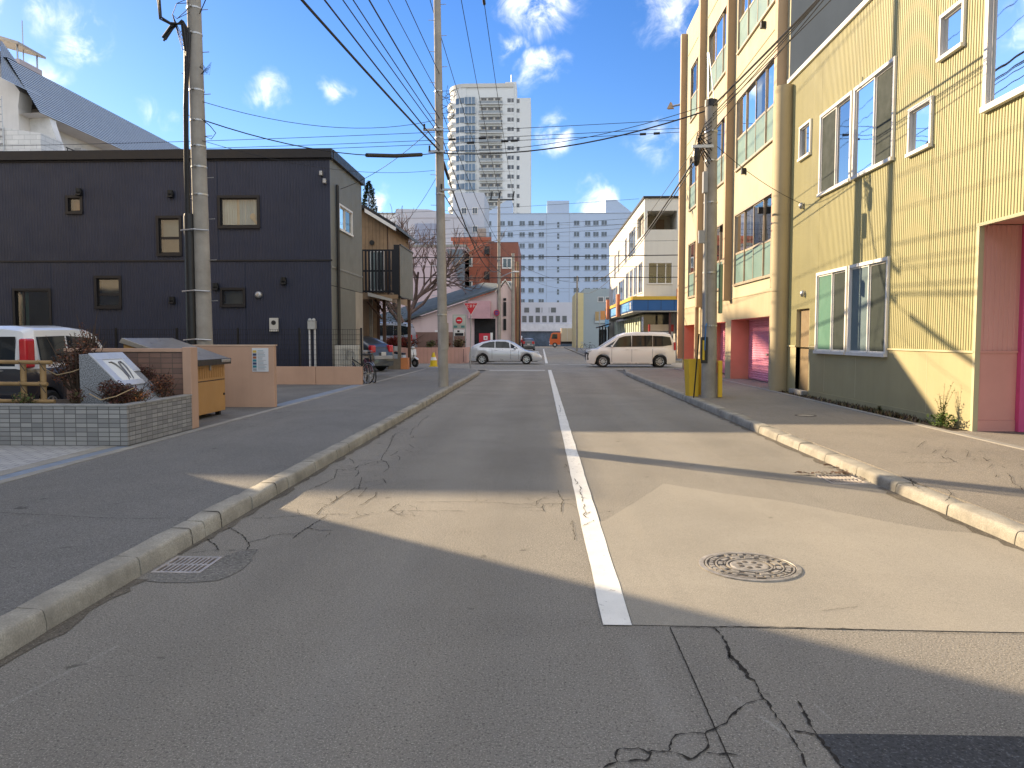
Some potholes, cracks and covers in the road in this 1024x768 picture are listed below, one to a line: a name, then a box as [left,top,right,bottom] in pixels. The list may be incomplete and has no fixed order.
drain grate [815,474,869,484]
crack [435,406,610,540]
manhole cover [699,552,802,582]
drain grate [151,556,223,573]
crack [603,626,1011,768]
